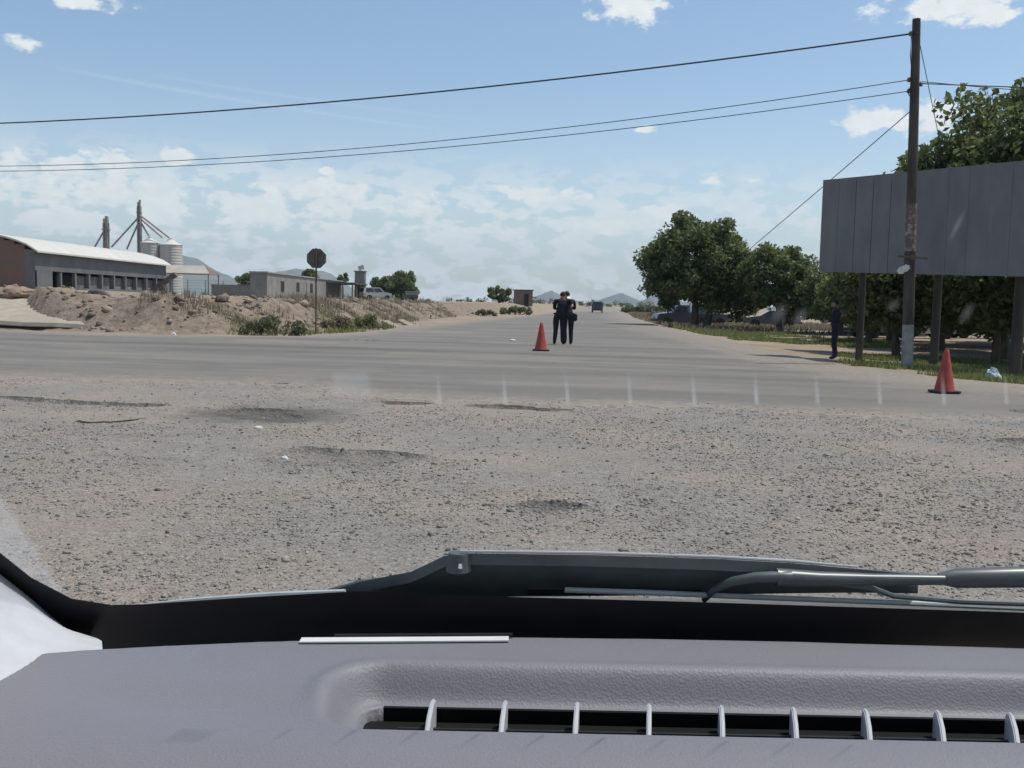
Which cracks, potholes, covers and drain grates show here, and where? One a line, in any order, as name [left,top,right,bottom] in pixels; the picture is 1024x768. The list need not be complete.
pothole [514,500,594,513]
pothole [250,446,440,470]
pothole [214,408,310,423]
pothole [0,396,172,407]
